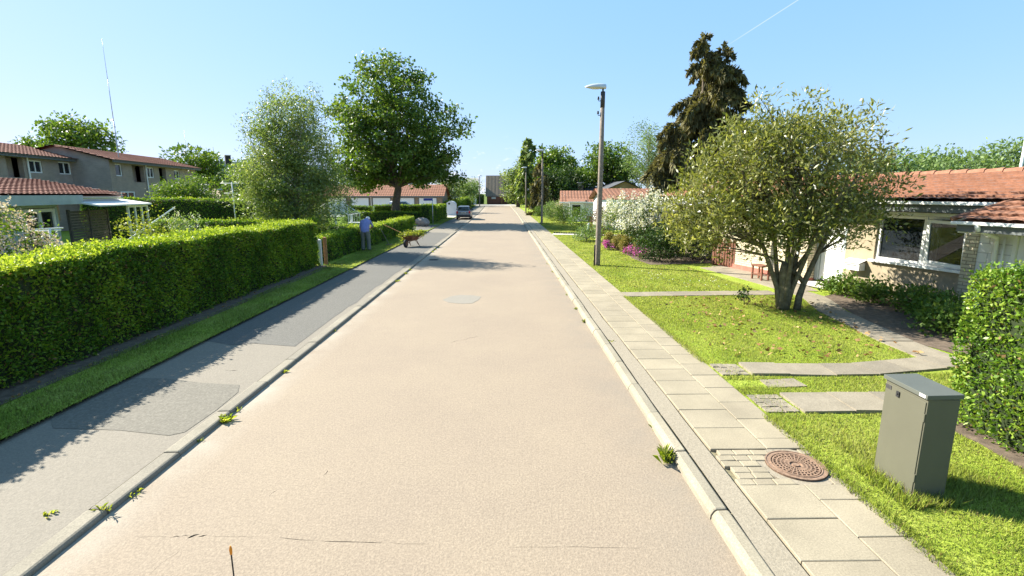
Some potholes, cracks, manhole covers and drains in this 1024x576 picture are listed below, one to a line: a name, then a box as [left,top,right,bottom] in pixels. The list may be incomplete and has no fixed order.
crack [149,534,399,563]
manhole cover [757,449,838,485]
